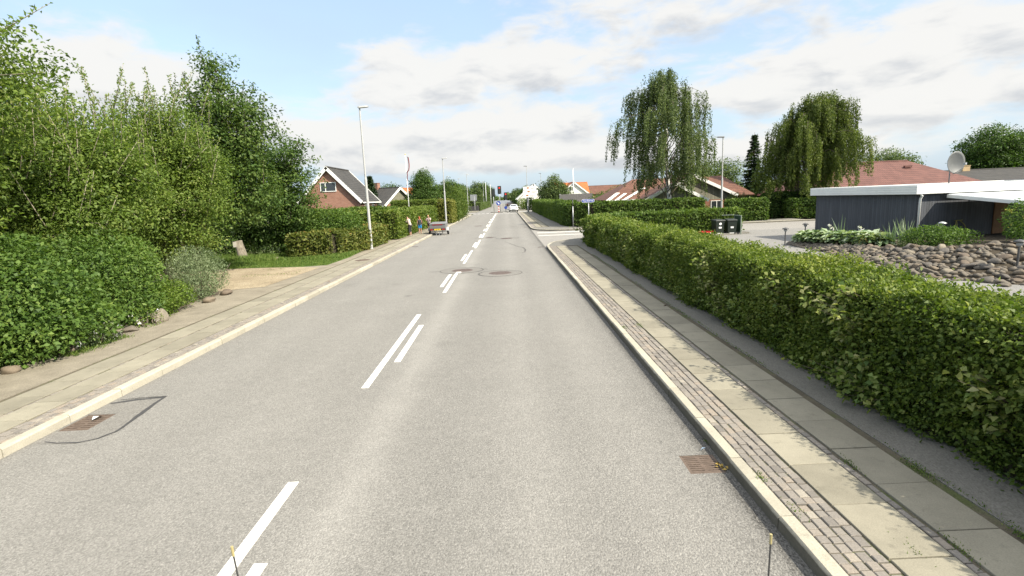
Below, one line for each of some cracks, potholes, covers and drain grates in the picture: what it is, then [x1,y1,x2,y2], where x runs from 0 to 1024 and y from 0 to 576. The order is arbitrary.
drain grate [679,455,726,474]
drain grate [60,414,115,431]
